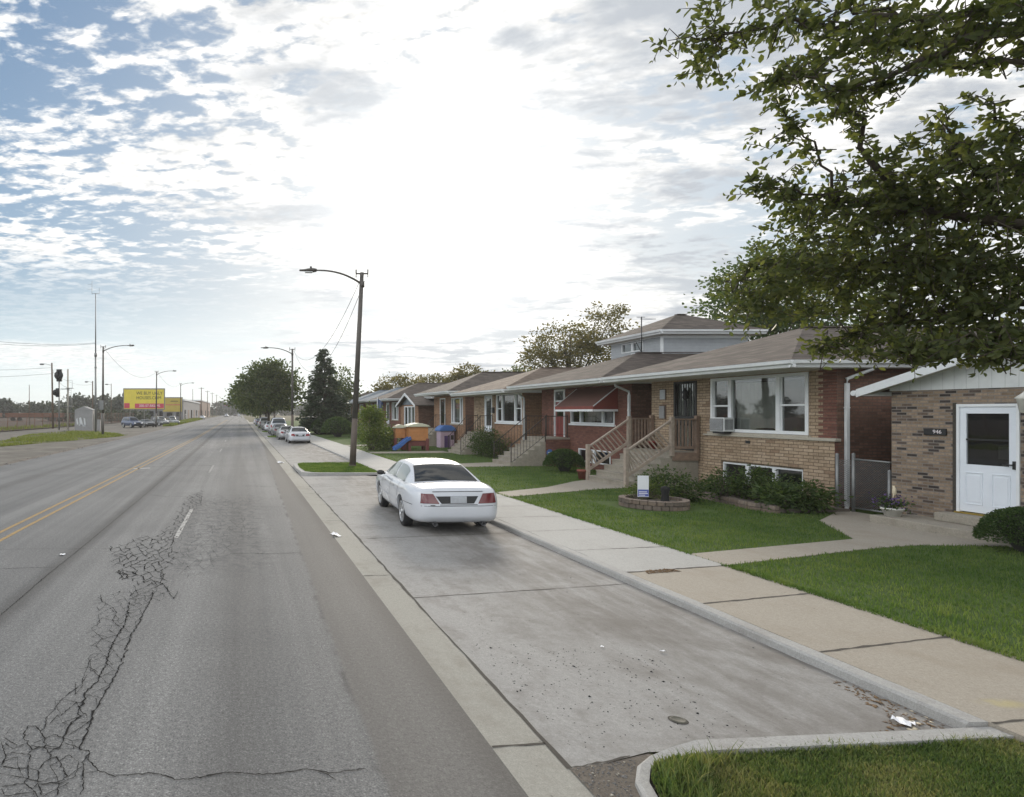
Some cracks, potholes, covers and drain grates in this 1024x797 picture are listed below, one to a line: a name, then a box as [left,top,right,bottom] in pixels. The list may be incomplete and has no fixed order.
crack [1,449,201,615]
crack [0,492,366,797]
utility cover [668,716,689,724]
